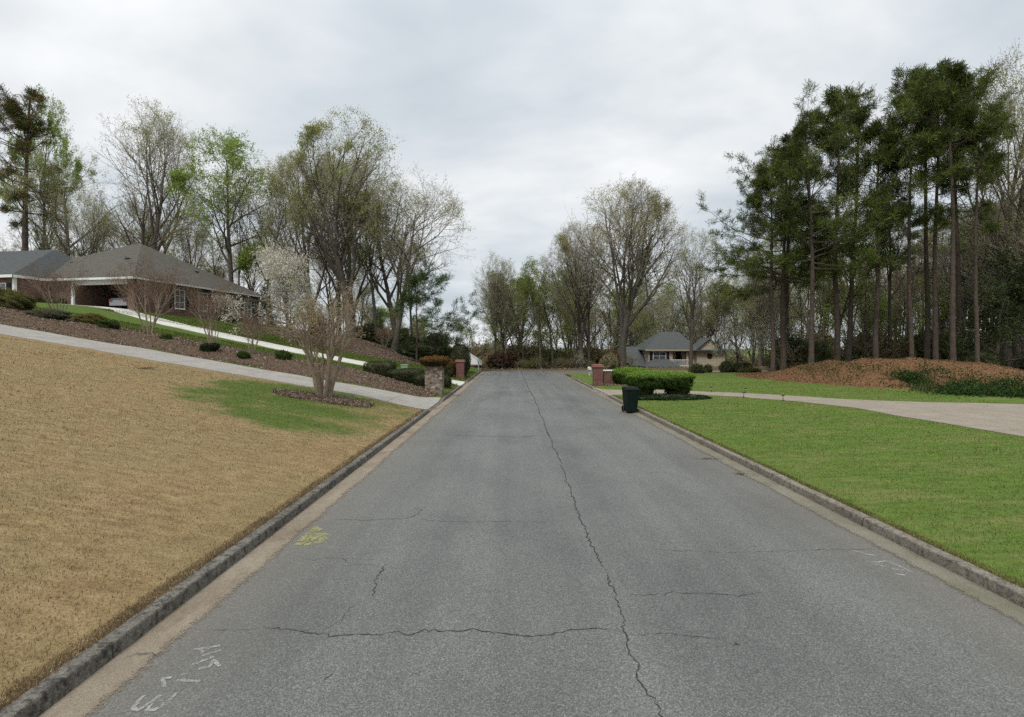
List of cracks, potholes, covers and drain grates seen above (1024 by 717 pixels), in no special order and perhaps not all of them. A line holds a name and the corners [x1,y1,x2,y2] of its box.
crack [522,374,756,717]
crack [207,557,618,639]
